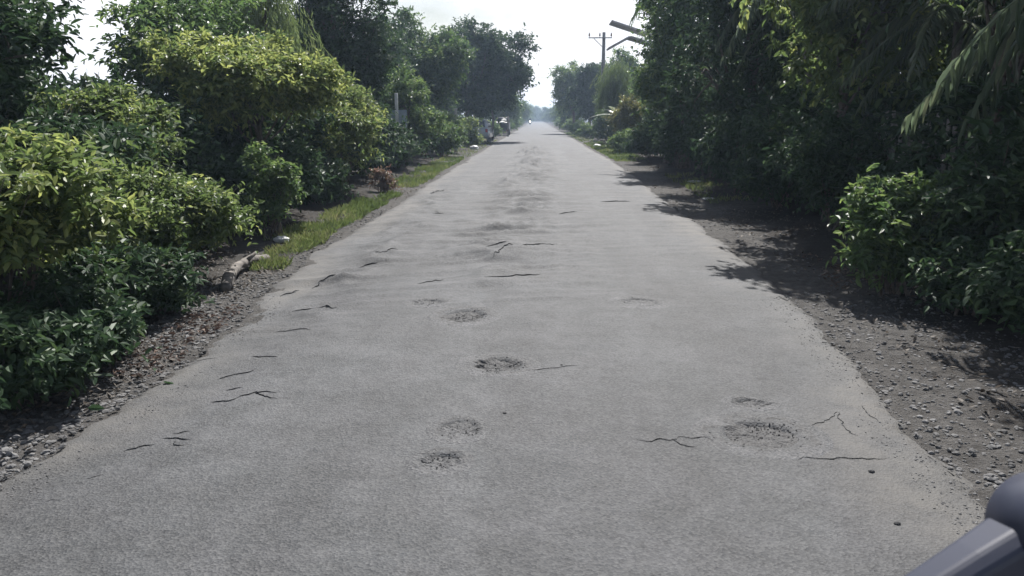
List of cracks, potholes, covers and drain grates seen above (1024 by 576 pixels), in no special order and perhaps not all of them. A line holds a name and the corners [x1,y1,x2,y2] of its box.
crack [123,431,191,452]
crack [635,436,707,447]
crack [489,241,553,253]
crack [170,356,277,402]
pothole [608,295,673,309]
crack [813,406,876,435]
pothole [455,353,541,377]
pothole [427,306,501,327]
pothole [426,415,491,445]
pothole [721,395,782,412]
pothole [405,447,475,477]
